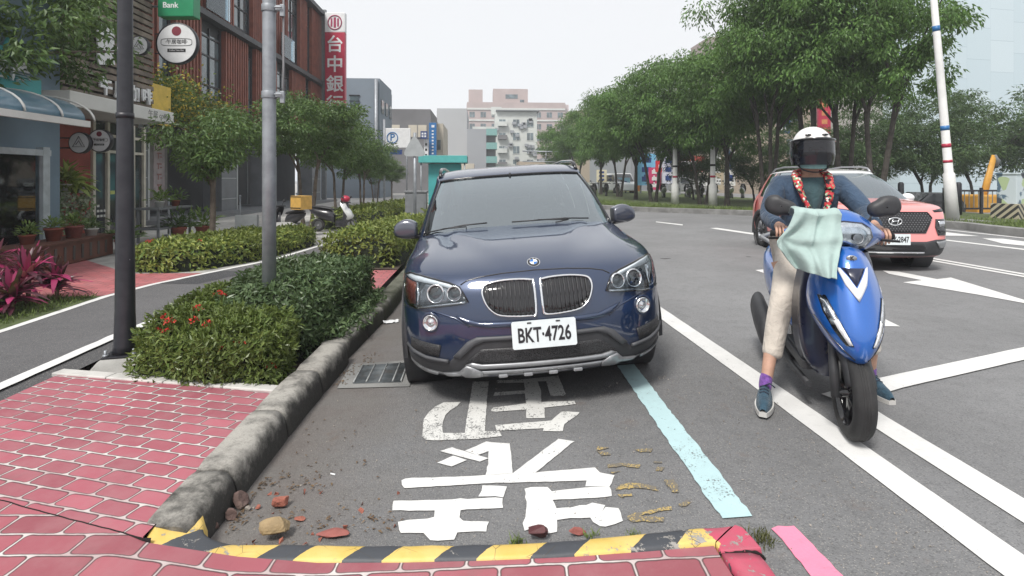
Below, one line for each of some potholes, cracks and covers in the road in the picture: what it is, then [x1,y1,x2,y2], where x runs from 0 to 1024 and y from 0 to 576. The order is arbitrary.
drain grate [338,360,411,388]
crack [719,550,766,561]
crack [0,499,151,543]
